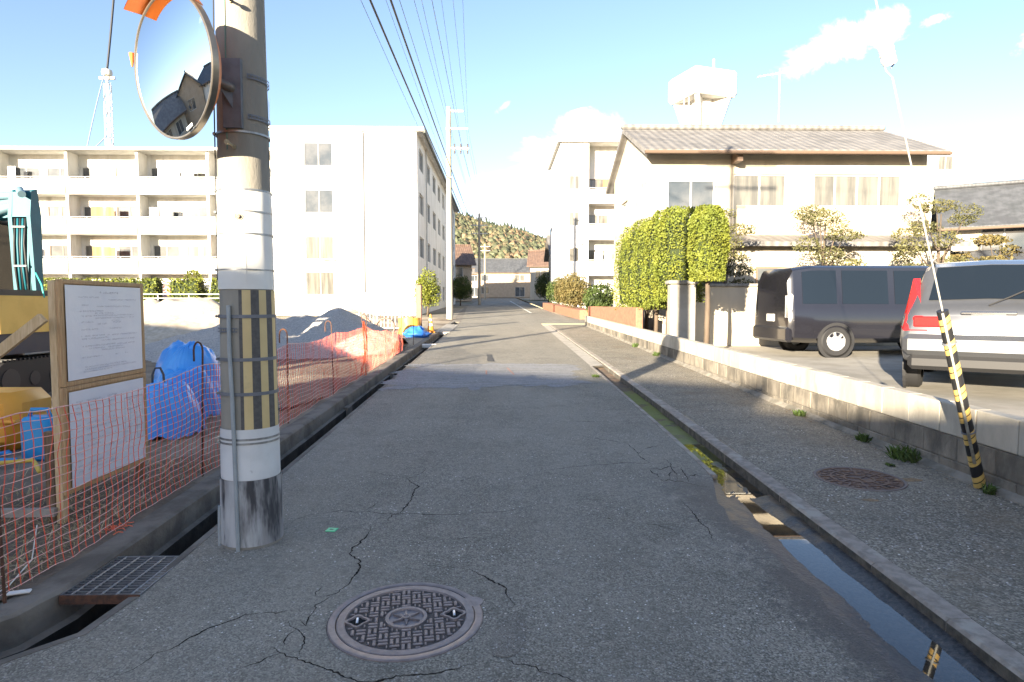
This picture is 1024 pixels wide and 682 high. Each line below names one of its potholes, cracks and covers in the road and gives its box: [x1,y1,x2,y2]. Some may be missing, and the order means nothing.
crack [506,659,575,682]
crack [105,471,534,682]
manhole cover [326,582,483,662]
manhole cover [813,467,908,492]
drain grate [59,556,181,605]
crack [561,421,713,488]
